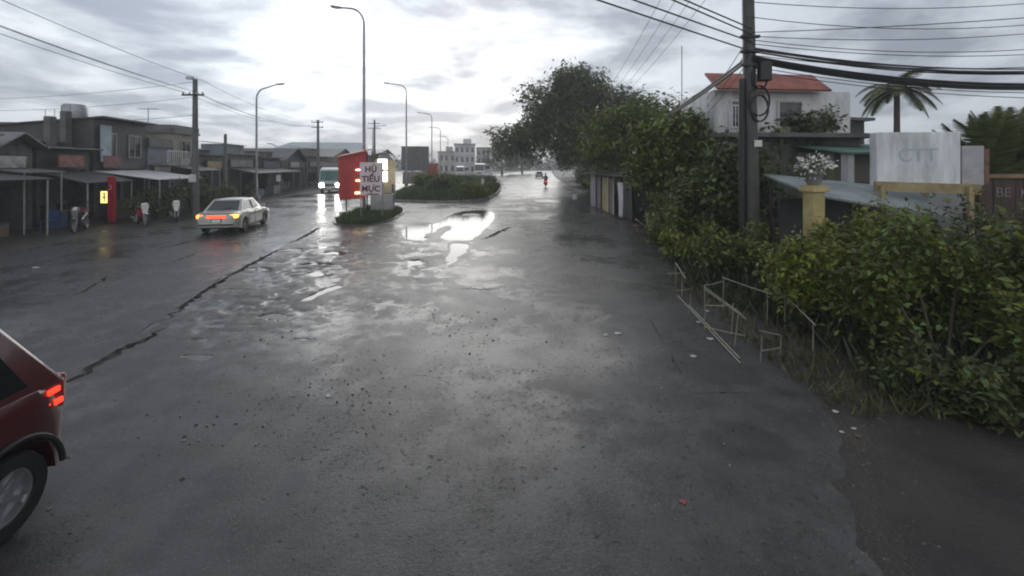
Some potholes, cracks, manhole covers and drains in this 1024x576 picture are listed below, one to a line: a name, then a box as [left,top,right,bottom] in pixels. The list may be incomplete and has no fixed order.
crack [648,317,716,374]
crack [66,226,322,383]
crack [484,227,509,239]
